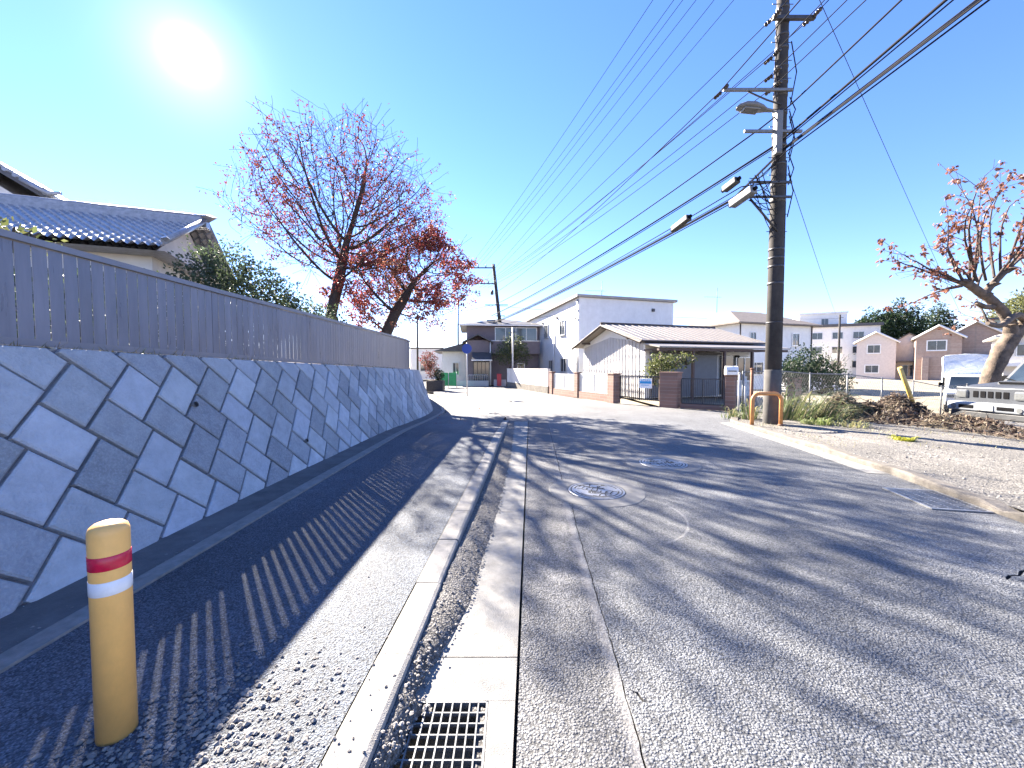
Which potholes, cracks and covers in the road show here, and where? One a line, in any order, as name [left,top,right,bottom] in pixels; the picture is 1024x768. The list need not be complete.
drain grate [391,701,488,768]
manhole cover [626,455,702,473]
drain grate [882,487,995,514]
manhole cover [549,477,646,507]
